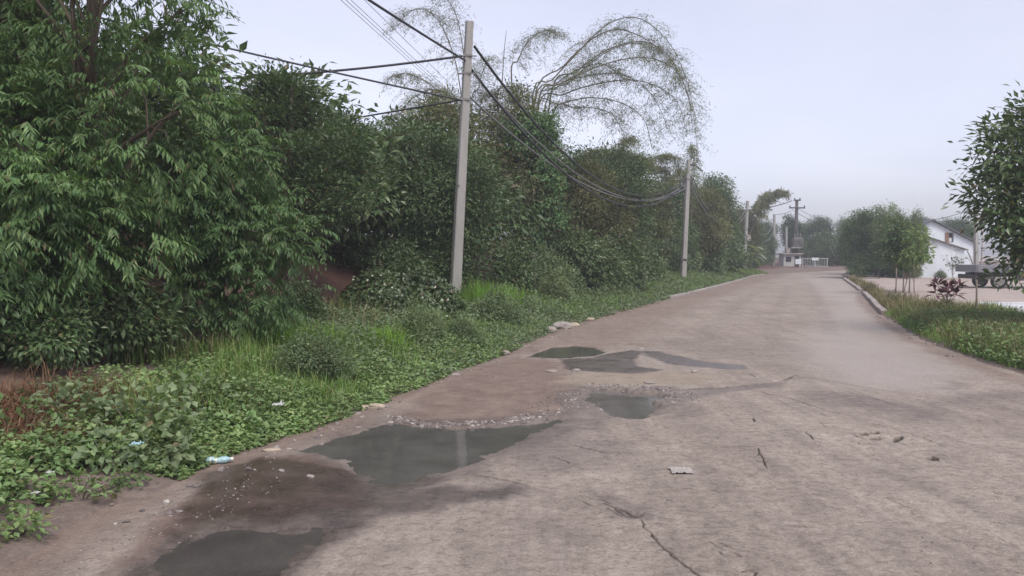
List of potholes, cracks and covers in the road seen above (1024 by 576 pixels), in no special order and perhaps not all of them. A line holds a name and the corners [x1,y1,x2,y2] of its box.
pothole [102,509,385,576]
crack [449,439,788,576]
pothole [274,411,590,492]
pothole [556,384,691,423]
pothole [502,342,630,361]
